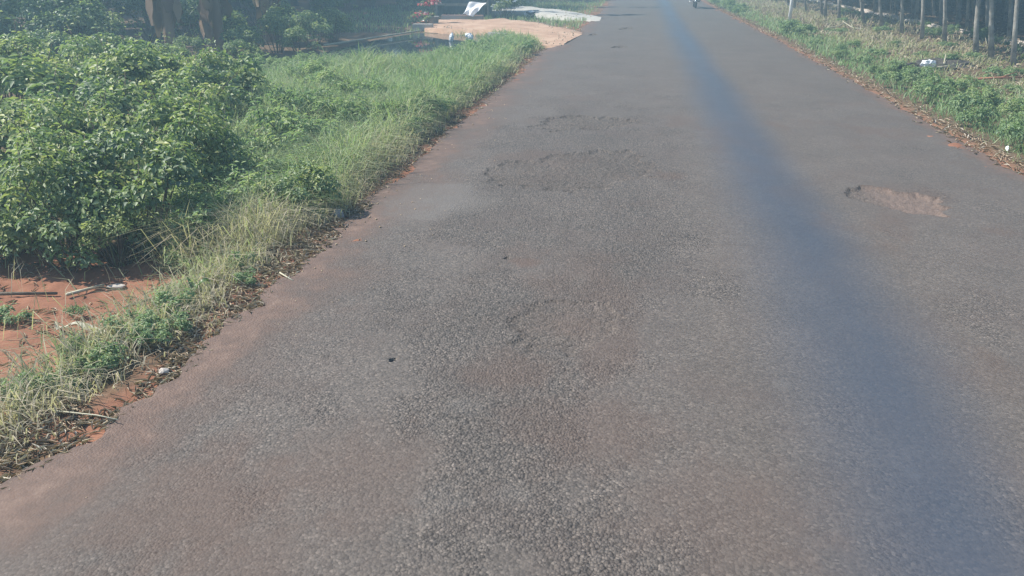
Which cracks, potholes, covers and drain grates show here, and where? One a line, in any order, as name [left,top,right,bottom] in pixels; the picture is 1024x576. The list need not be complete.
pothole [844,185,948,217]
